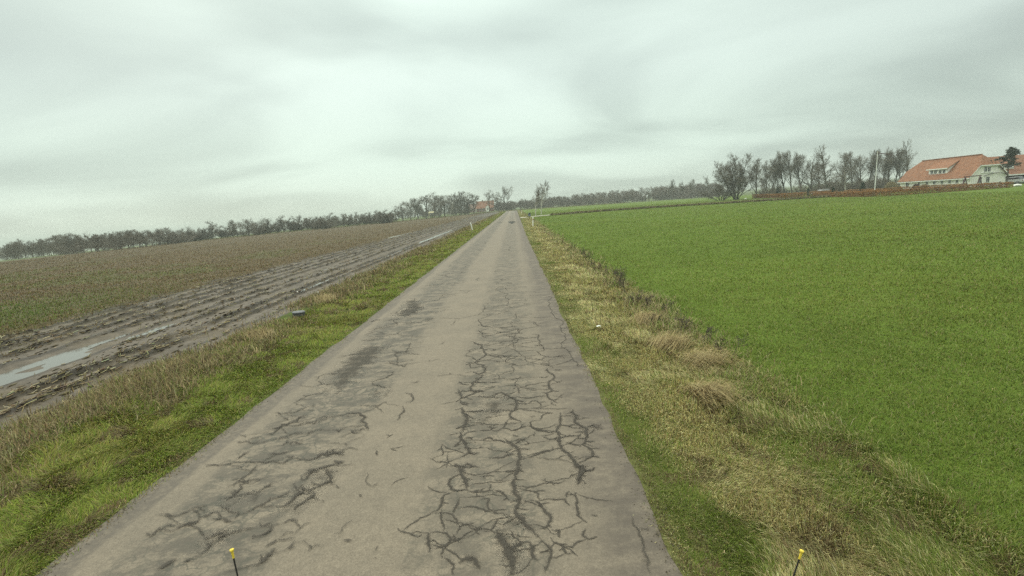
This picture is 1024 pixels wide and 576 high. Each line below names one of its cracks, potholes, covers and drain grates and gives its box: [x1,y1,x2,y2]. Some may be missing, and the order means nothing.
crack [146,243,612,574]
crack [632,520,650,571]
